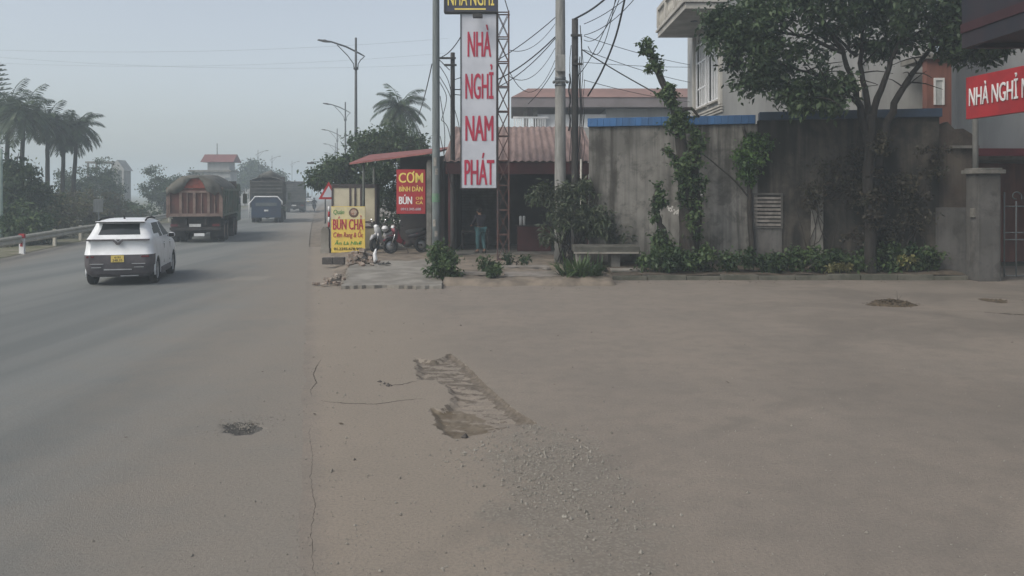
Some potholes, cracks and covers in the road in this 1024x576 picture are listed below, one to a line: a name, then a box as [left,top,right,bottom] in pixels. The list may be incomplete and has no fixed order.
crack [310,361,422,404]
pothole [412,354,538,439]
crack [308,424,316,573]
pothole [217,420,269,436]
